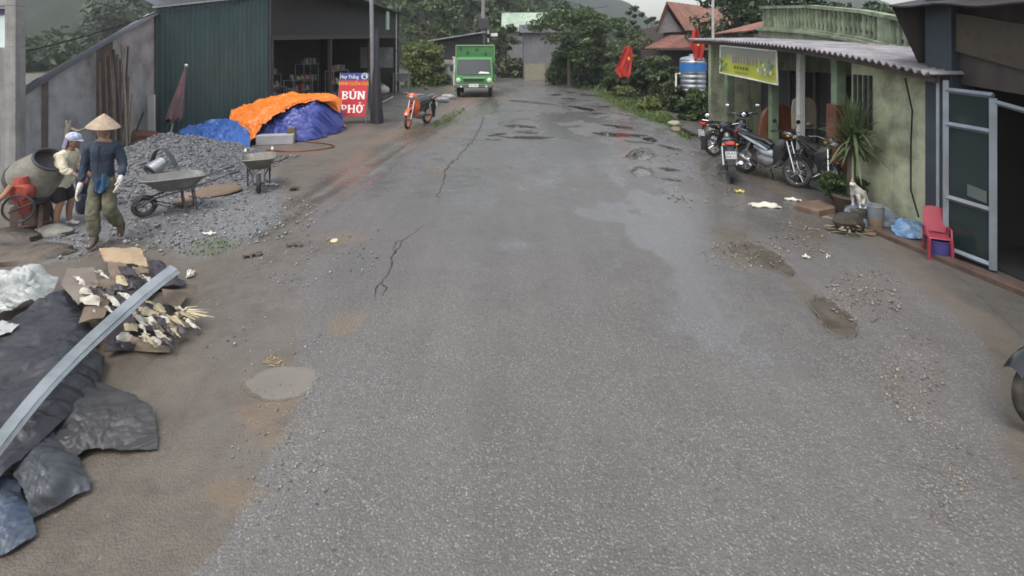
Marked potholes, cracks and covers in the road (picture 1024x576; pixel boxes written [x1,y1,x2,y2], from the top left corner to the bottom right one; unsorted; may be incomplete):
pothole [729,240,798,278]
crack [436,113,493,201]
pothole [564,104,597,112]
crack [374,228,419,301]
pothole [628,166,656,177]
pothole [623,147,657,161]
pothole [806,293,860,341]
